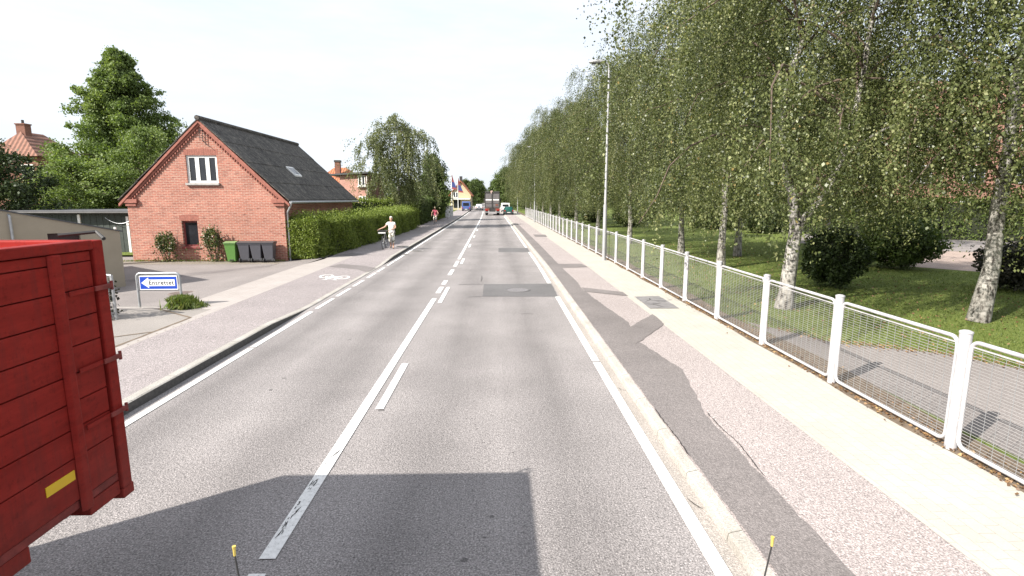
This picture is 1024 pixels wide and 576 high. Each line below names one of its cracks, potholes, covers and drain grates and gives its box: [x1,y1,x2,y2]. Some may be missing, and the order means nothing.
utility cover [636,296,678,308]
crack [707,412,765,476]
